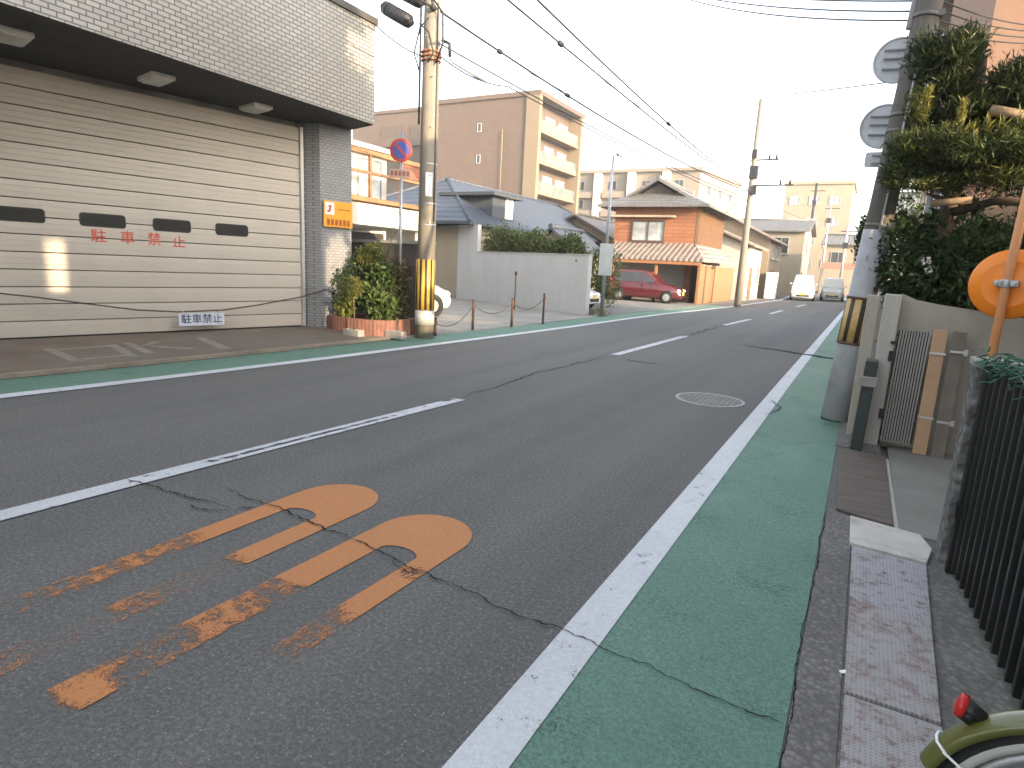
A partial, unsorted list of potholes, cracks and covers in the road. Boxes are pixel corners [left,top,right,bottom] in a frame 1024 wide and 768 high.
manhole cover [675,392,745,408]
crack [126,478,252,510]
crack [219,486,827,768]
crack [745,344,834,359]
